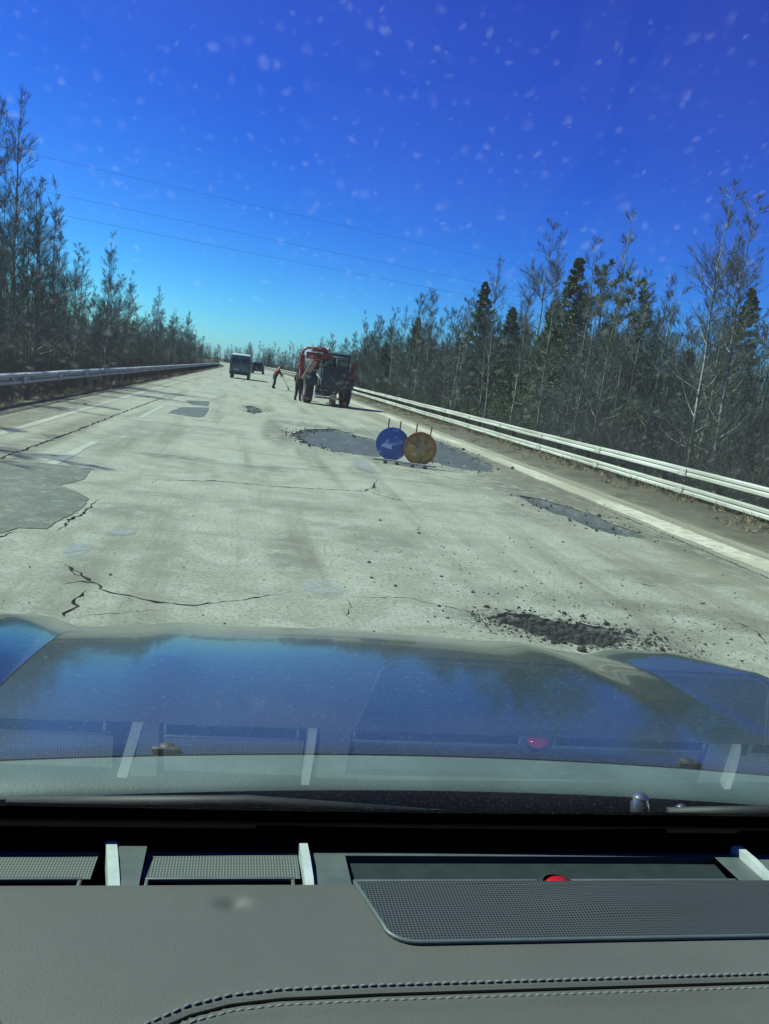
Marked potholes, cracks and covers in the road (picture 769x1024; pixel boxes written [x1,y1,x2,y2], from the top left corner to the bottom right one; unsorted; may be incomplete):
crack [61,564,294,616]
pothole [497,612,634,647]
pothole [518,495,646,539]
crack [57,499,99,531]
crack [138,478,434,504]
